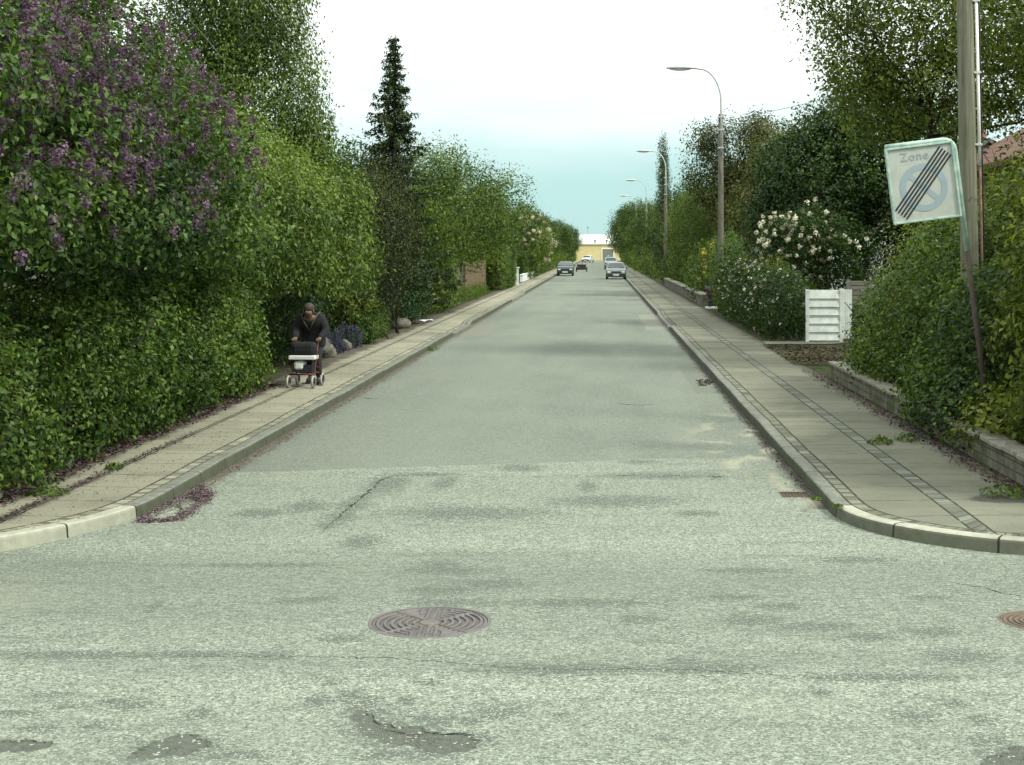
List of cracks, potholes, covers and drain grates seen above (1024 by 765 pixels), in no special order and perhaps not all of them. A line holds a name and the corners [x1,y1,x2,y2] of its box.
manhole cover [997,610,1024,629]
pothole [349,710,480,755]
manhole cover [368,606,492,639]
pothole [0,739,54,753]
pothole [127,734,214,761]
crack [324,474,452,530]
